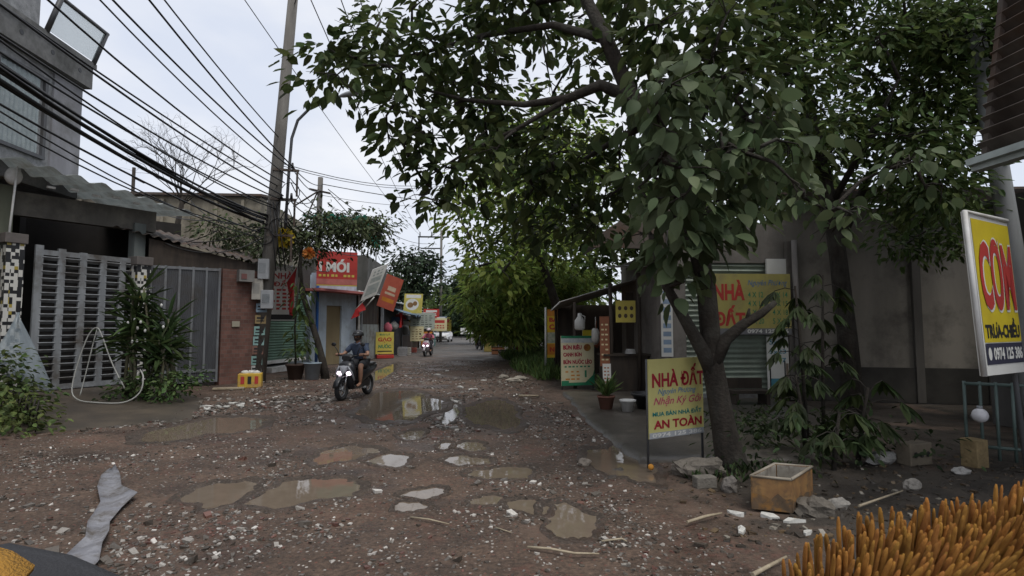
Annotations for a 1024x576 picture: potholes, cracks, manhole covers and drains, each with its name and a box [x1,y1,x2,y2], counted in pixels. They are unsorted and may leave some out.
pothole [392,484,451,501]
pothole [438,402,465,430]
pothole [356,451,415,469]
pothole [577,441,670,490]
pothole [533,496,607,545]
pothole [345,387,454,426]
pothole [437,453,499,467]
pothole [165,476,267,515]
pothole [233,474,371,513]
pothole [458,464,541,481]
pothole [305,442,390,468]
pothole [124,415,279,445]
